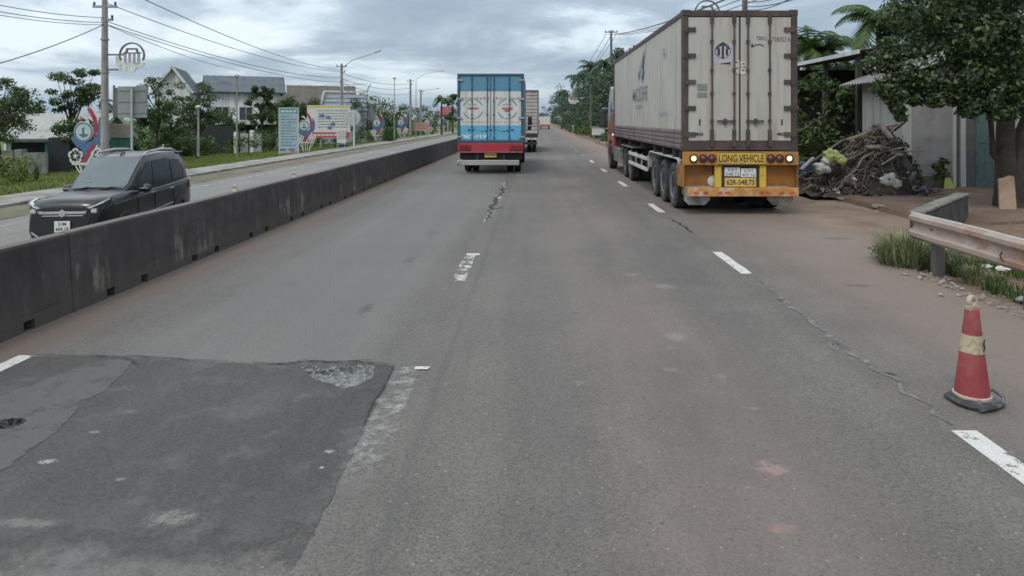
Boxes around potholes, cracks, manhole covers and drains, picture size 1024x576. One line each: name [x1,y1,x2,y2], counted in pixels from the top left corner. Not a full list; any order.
pothole [300,364,377,388]
crack [486,181,508,221]
crack [754,276,953,425]
pothole [0,418,28,429]
